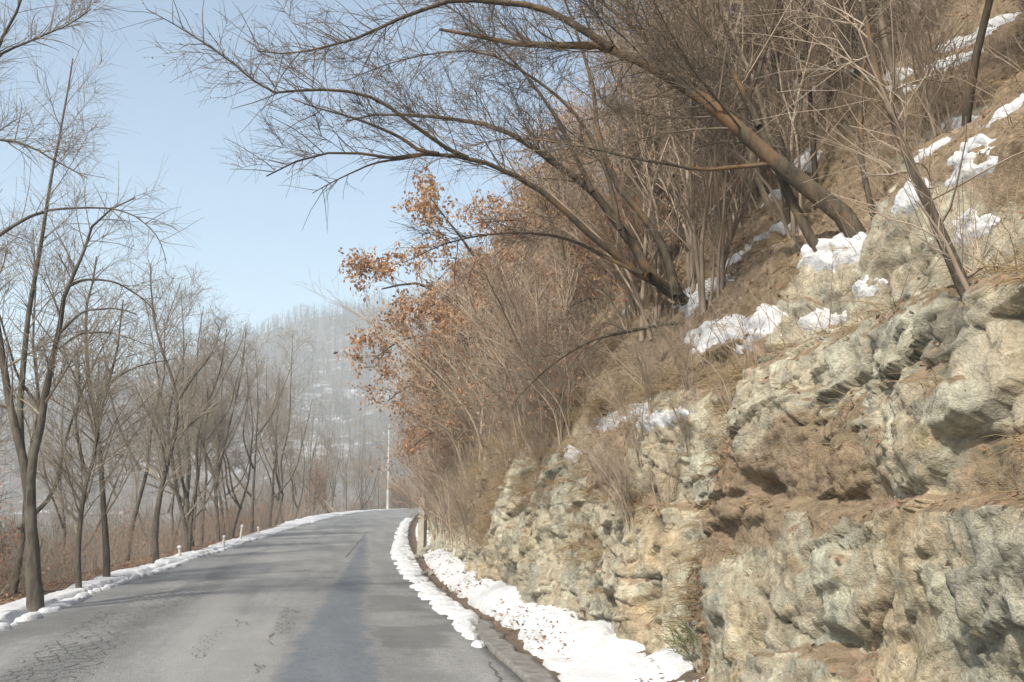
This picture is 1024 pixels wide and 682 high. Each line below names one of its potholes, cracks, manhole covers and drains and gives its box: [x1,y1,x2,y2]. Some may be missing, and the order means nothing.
crack [3,576,235,682]
